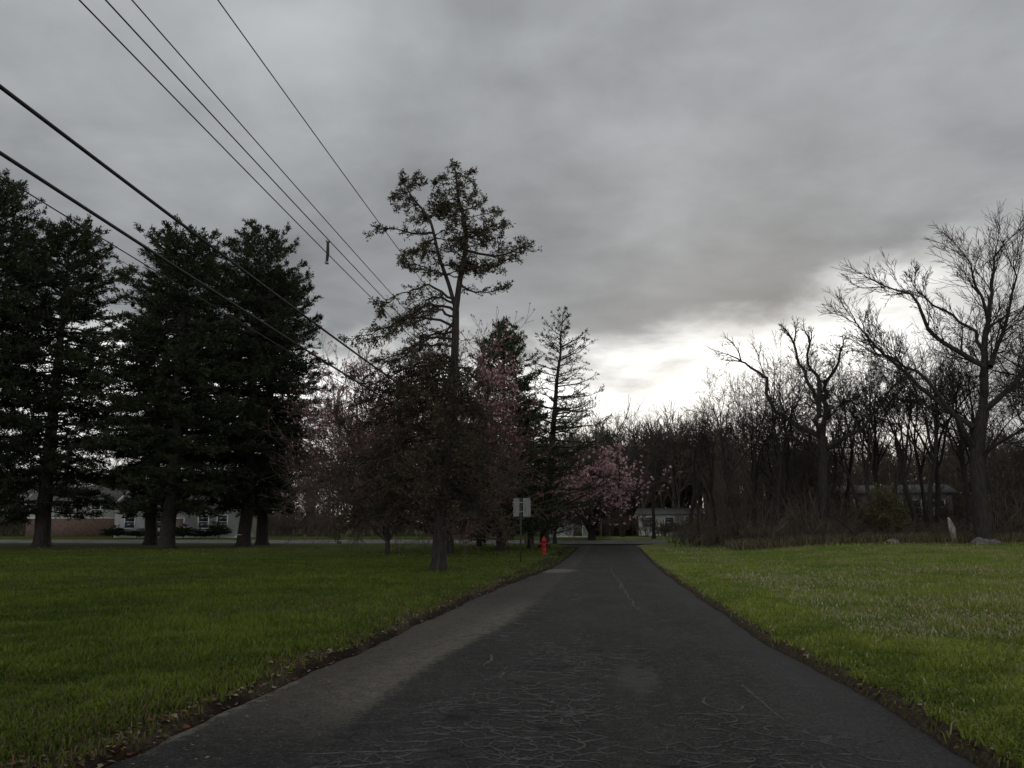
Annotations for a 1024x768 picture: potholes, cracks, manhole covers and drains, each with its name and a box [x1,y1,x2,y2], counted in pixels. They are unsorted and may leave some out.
crack [610,567,670,621]
crack [305,595,905,768]
